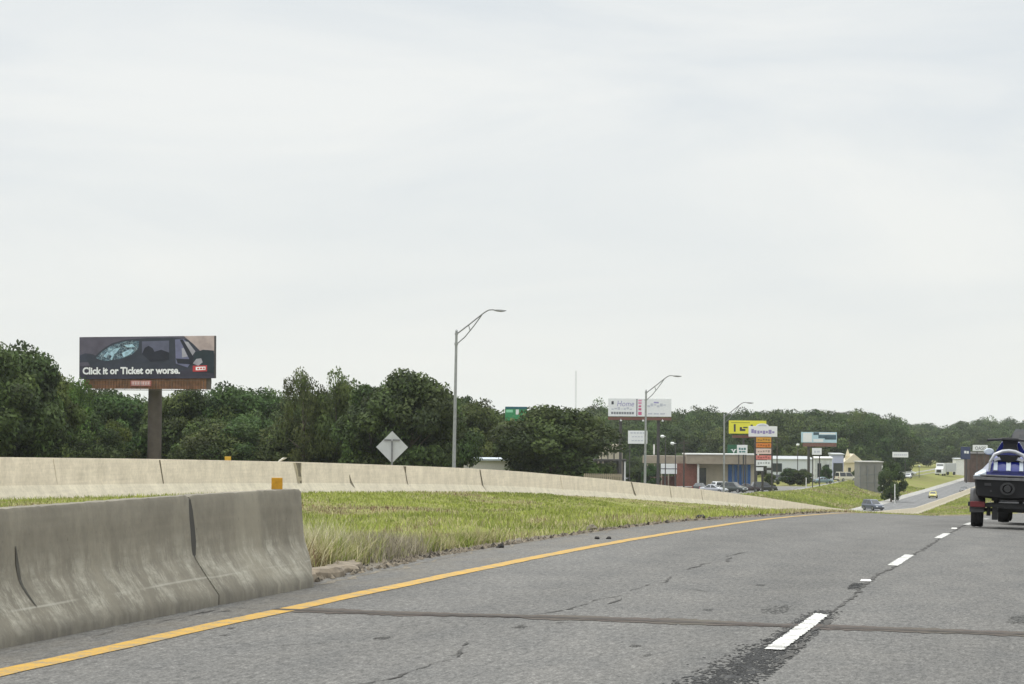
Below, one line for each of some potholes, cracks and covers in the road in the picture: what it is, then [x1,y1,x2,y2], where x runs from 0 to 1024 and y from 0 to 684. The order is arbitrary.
crack [763,525,965,667]
crack [539,552,744,623]
crack [359,642,486,684]
